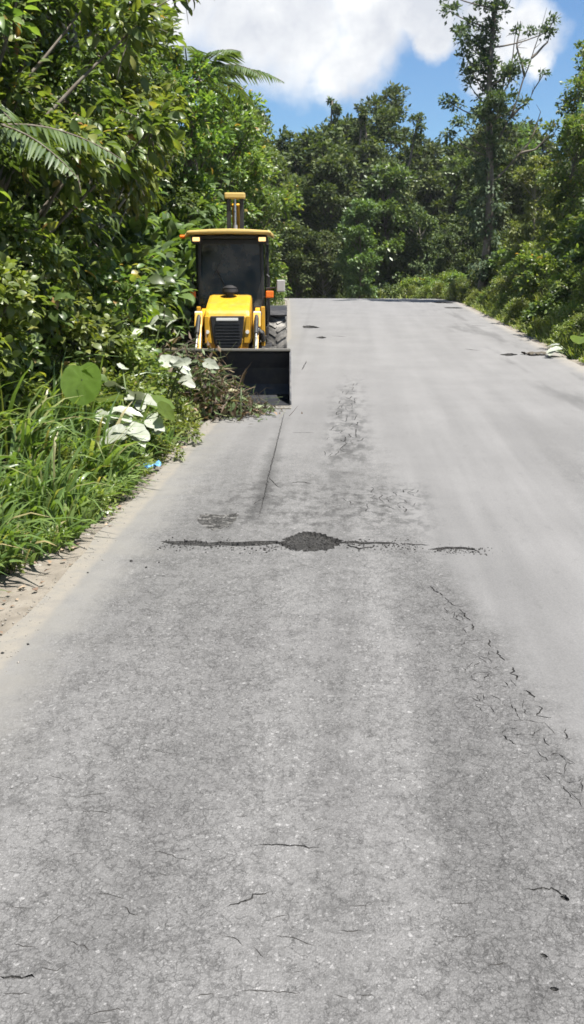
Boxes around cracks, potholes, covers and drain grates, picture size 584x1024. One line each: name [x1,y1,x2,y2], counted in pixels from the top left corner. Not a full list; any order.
crack [430,586,583,800]
crack [345,487,415,516]
crack [325,384,364,457]
crack [254,416,315,518]
crack [528,887,569,900]
crack [229,892,287,918]
crack [259,827,323,848]
crack [0,964,66,995]
pothole [279,531,344,552]
crack [161,540,475,550]
